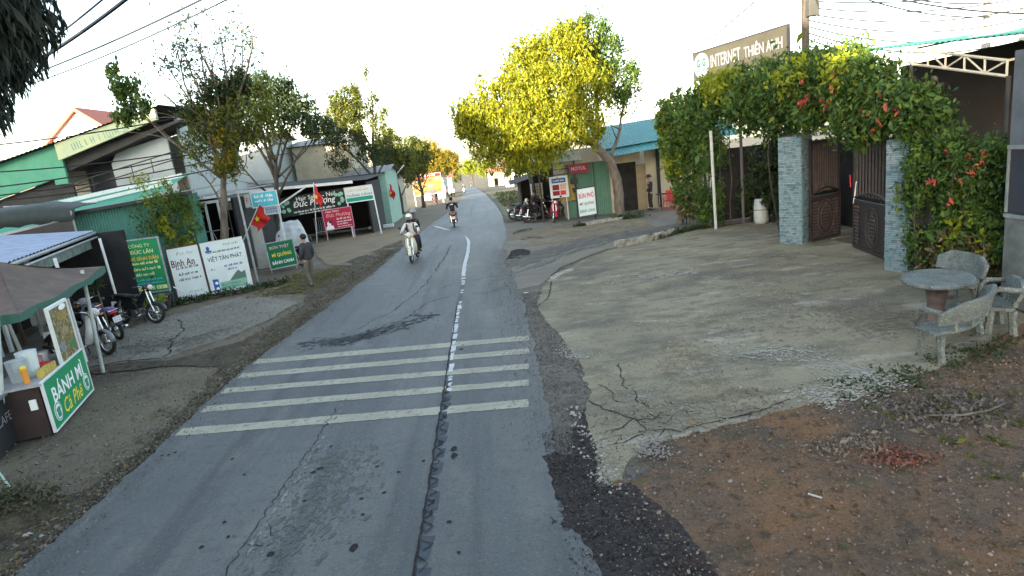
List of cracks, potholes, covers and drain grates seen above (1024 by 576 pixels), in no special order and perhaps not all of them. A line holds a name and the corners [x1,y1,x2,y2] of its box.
crack [332,252,507,576]
crack [588,363,805,446]
crack [163,320,185,358]
crack [226,408,336,576]
pothole [507,249,531,259]
